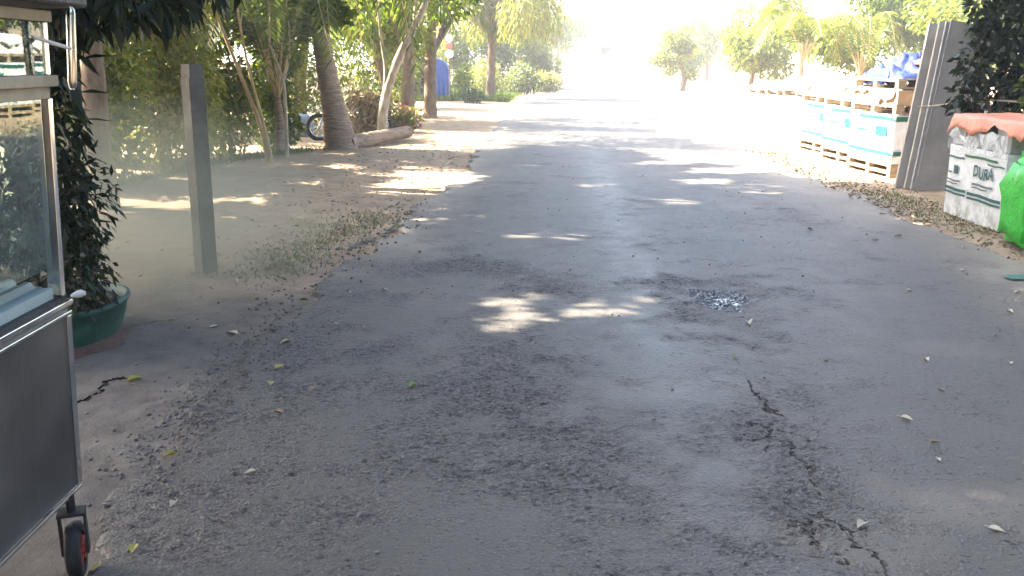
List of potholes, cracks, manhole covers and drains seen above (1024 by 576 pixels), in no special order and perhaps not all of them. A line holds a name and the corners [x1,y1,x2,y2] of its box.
pothole [686,289,759,312]
crack [77,379,122,404]
crack [738,380,887,576]
